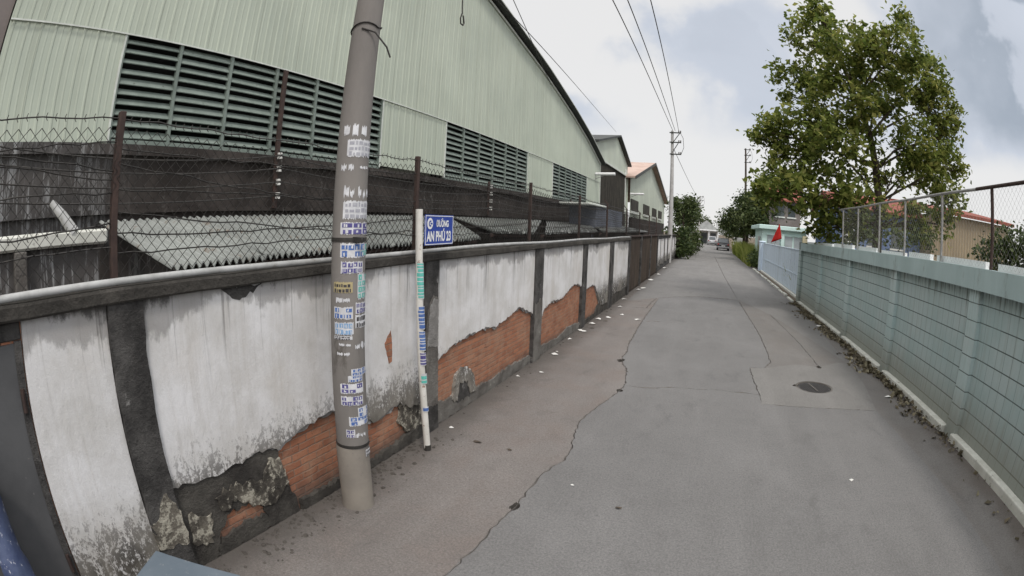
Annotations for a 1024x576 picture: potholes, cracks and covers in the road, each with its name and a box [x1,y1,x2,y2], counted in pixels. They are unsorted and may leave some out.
manhole cover [796,381,833,394]
